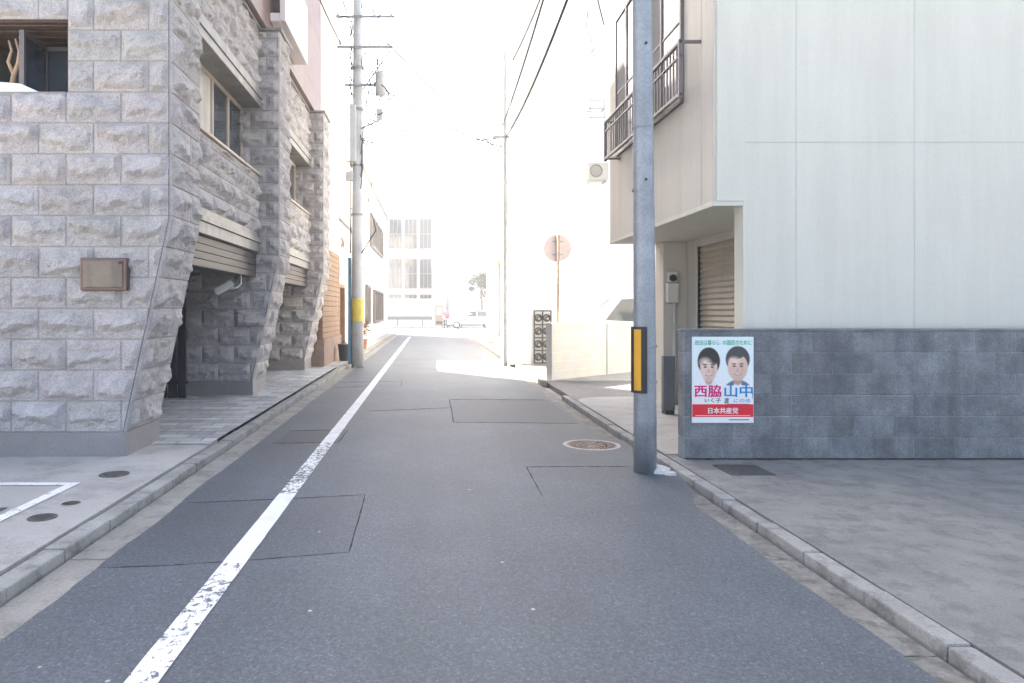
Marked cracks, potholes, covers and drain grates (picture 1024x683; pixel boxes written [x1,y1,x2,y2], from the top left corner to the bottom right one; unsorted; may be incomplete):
manhole cover [563,440,621,450]
manhole cover [27,513,58,522]
